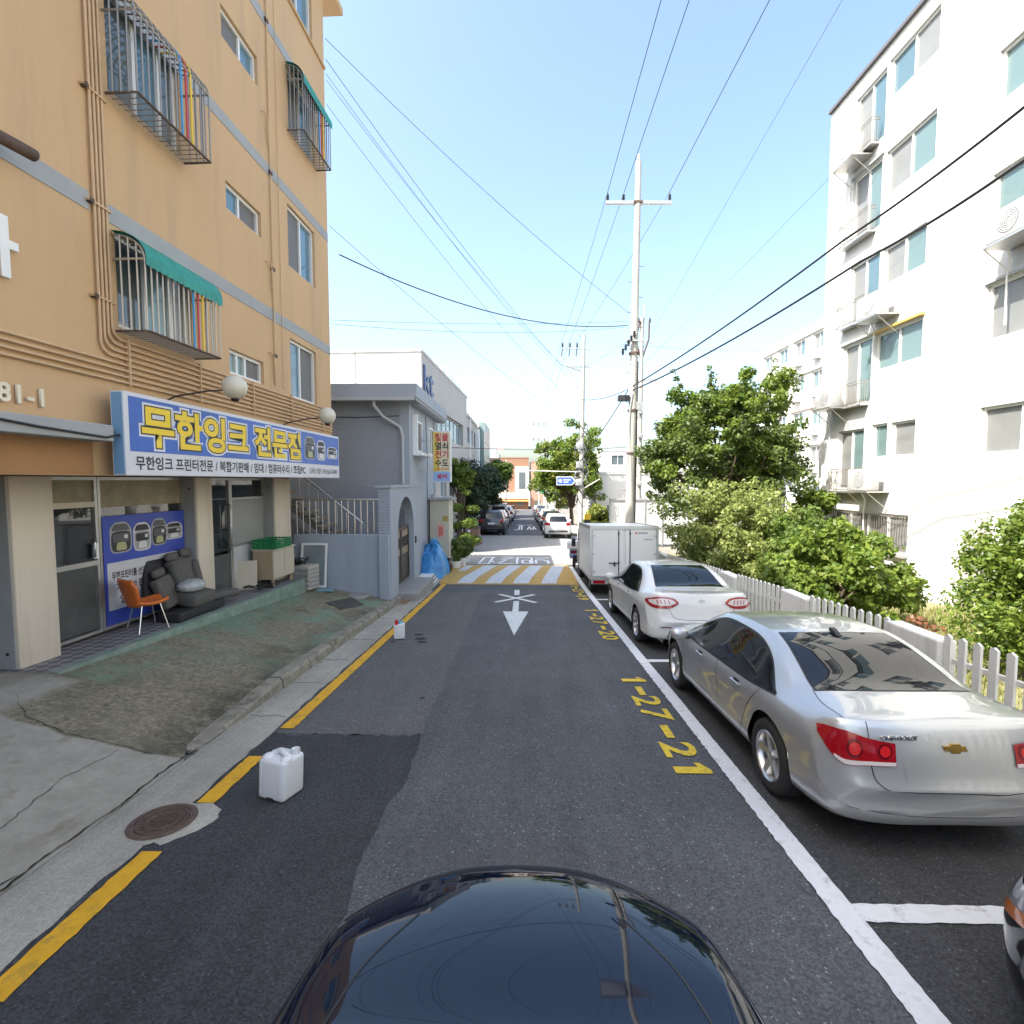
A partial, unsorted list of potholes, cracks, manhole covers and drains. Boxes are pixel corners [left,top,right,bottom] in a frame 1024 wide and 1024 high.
manhole cover [326,597,364,610]
crack [0,701,222,891]
manhole cover [113,799,222,849]
